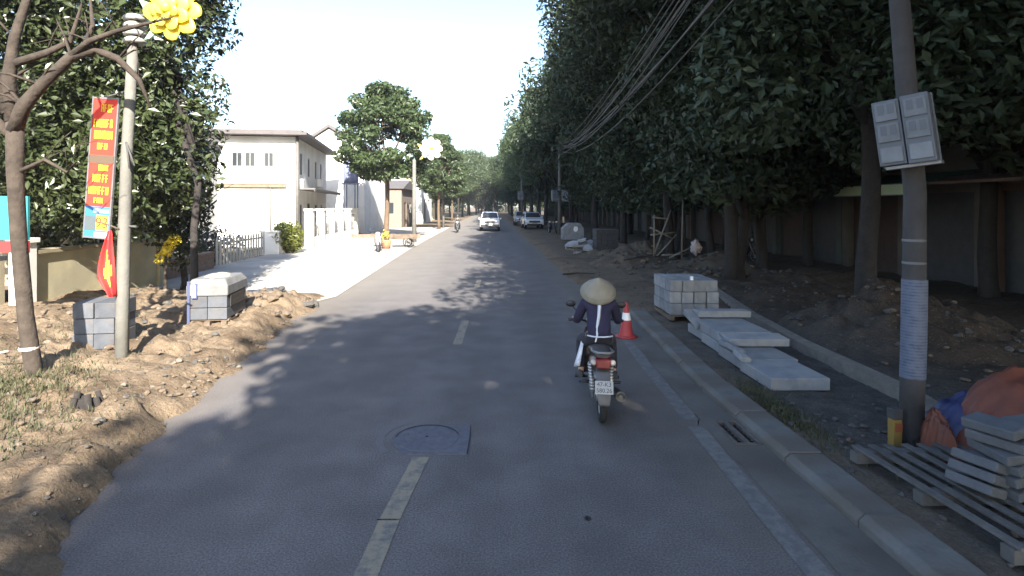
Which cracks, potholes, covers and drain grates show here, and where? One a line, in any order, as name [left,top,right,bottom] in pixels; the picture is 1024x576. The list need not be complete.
manhole cover [376,419,471,455]
drain grate [711,420,764,445]
